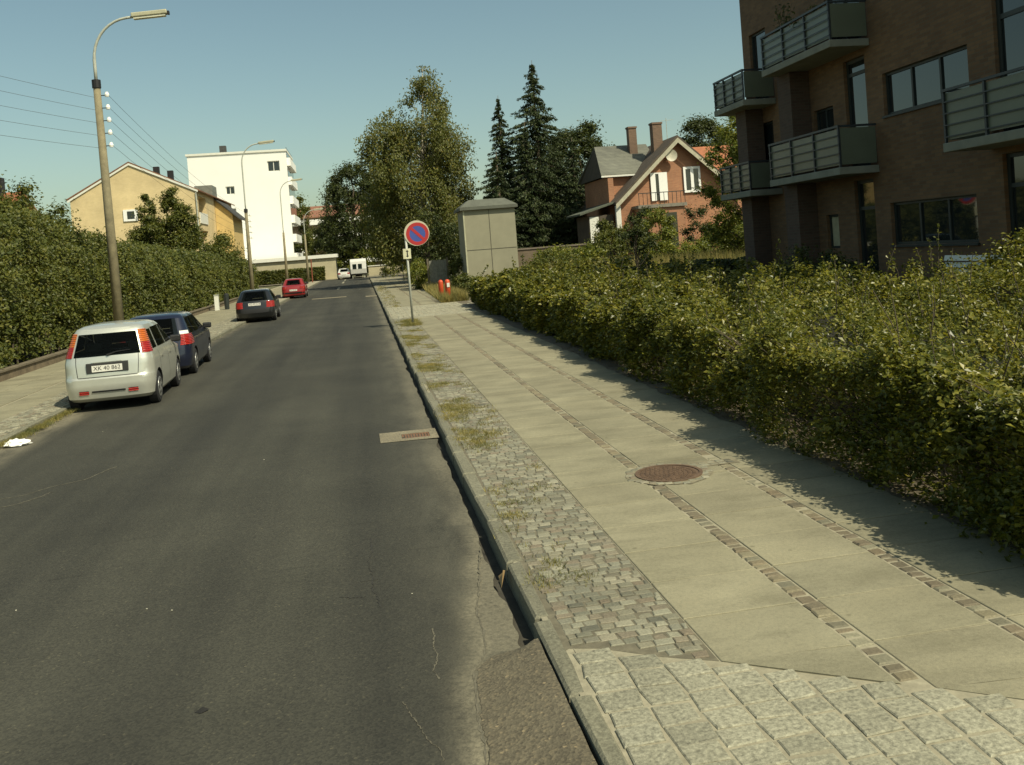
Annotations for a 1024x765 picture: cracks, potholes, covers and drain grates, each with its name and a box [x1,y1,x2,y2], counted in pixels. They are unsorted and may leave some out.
crack [341,538,382,607]
crack [0,466,117,507]
manhole cover [635,464,703,482]
crack [432,628,440,679]
crack [402,701,445,759]
